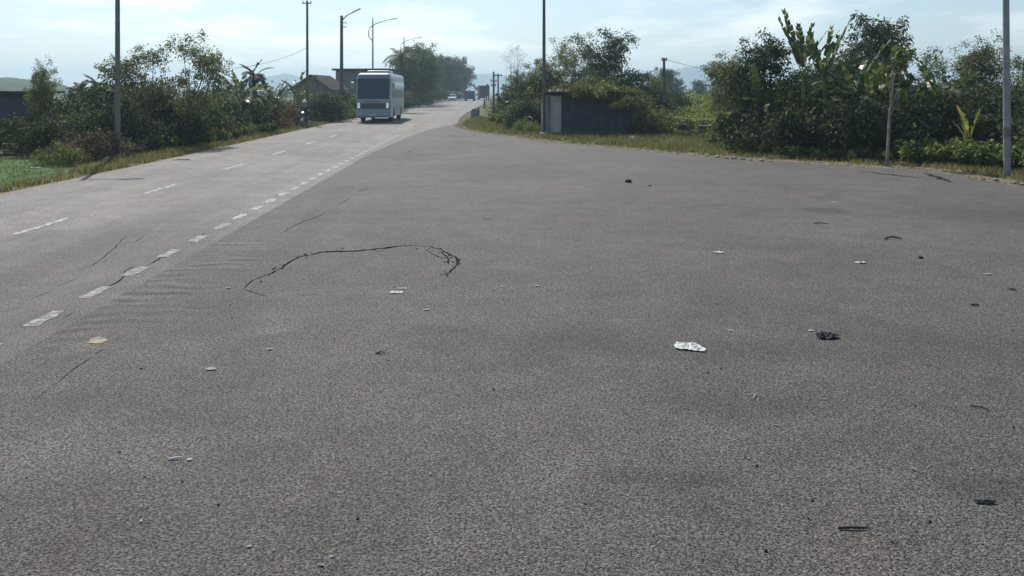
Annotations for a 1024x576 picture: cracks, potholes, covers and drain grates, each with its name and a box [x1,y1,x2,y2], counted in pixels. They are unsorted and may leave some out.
crack [244,243,461,296]
crack [29,234,204,318]
